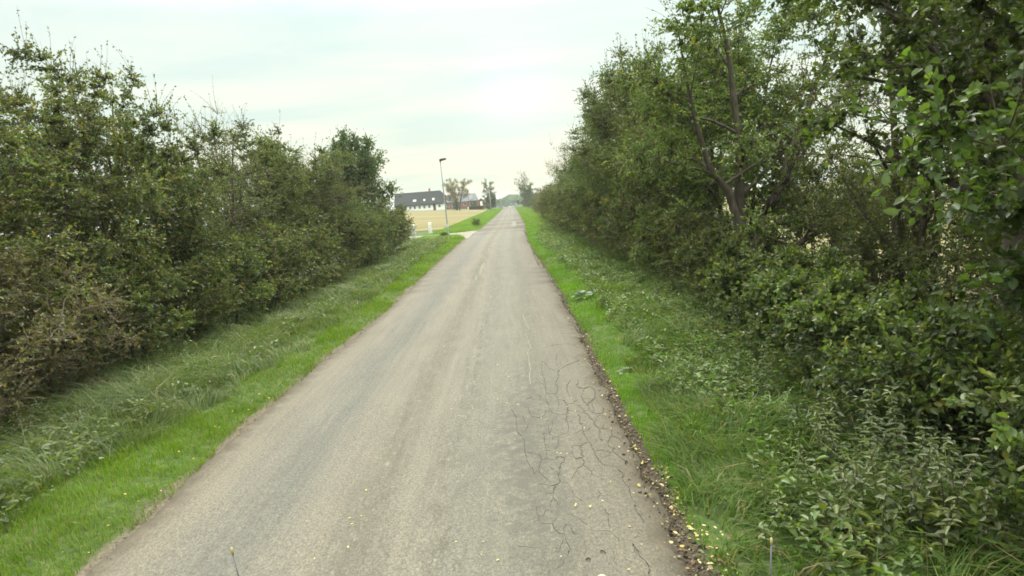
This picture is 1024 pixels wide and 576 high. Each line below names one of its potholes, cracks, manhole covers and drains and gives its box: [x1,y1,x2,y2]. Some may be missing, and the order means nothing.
crack [511,308,650,576]
